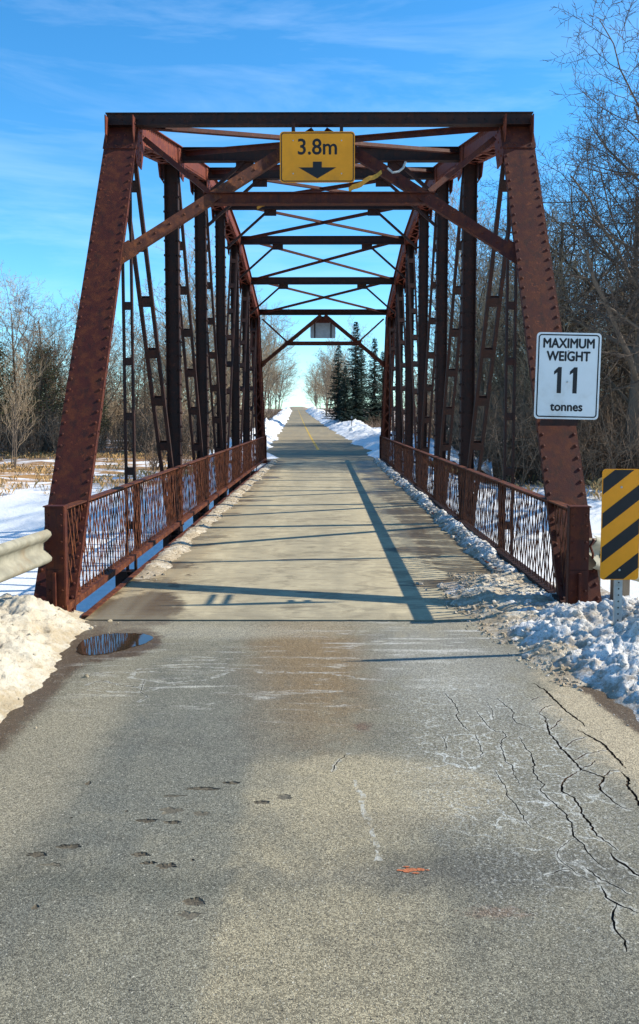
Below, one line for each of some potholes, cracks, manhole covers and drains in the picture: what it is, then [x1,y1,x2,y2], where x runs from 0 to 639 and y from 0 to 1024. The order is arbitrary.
crack [443,683,639,952]
